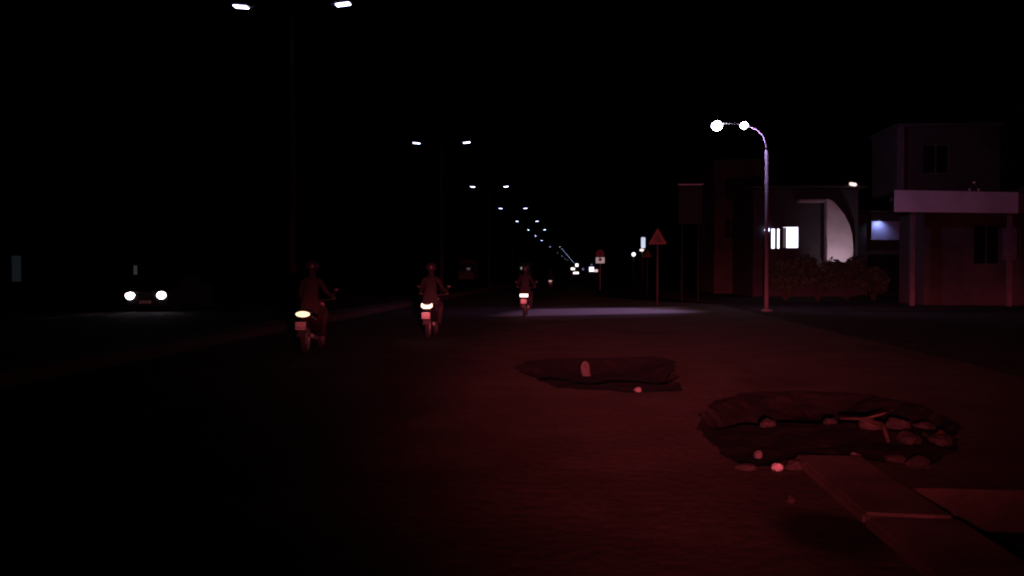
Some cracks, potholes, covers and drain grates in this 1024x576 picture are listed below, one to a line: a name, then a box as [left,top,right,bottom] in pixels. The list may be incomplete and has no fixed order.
pothole [694,391,962,467]
pothole [513,357,683,393]
